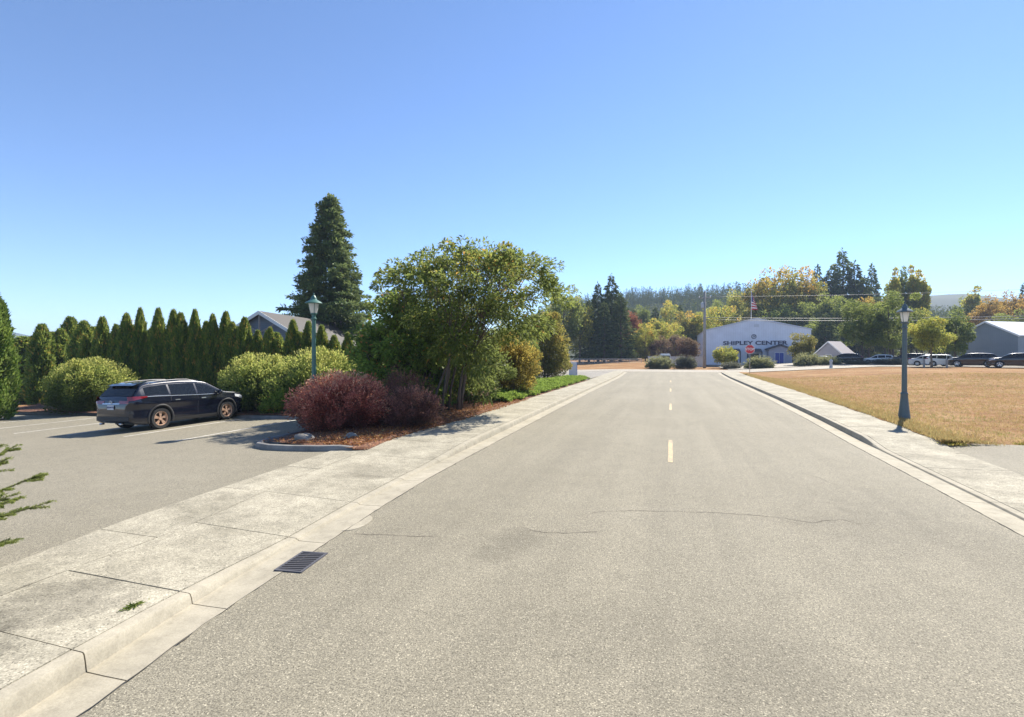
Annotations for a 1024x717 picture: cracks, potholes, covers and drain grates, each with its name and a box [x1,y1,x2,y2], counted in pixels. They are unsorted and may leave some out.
drain grate [274,551,328,573]
crack [589,510,866,526]
